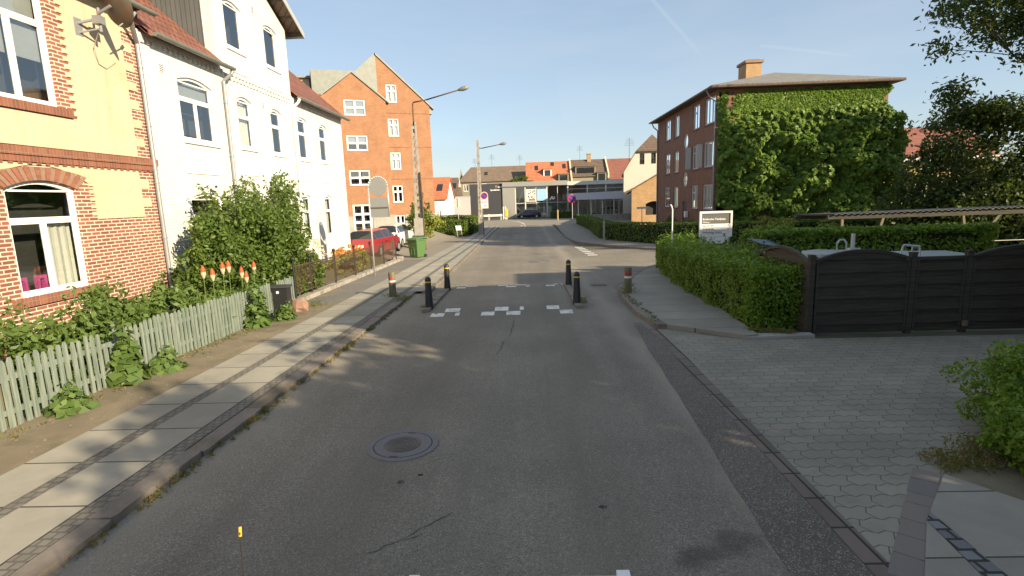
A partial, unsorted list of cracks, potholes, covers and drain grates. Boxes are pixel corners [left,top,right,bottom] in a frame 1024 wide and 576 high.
manhole cover [367,430,439,462]
crack [365,512,452,555]
